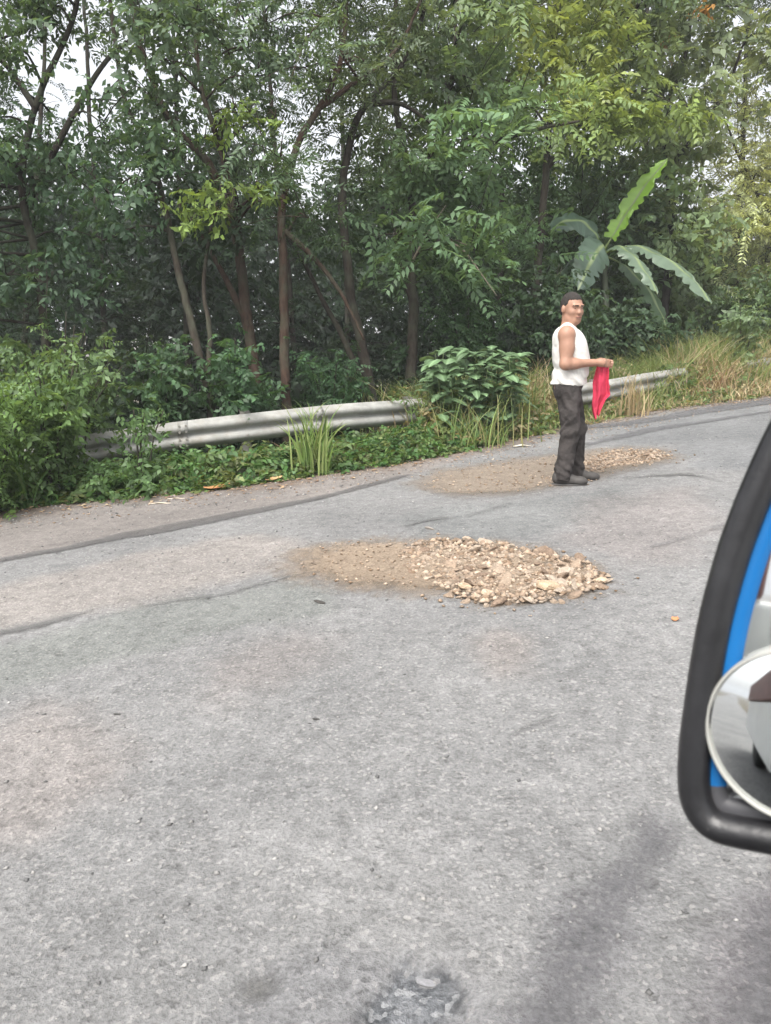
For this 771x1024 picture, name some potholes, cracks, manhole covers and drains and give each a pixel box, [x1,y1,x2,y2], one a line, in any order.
pothole [291,540,598,597]
pothole [364,964,461,1024]
pothole [419,448,672,494]
